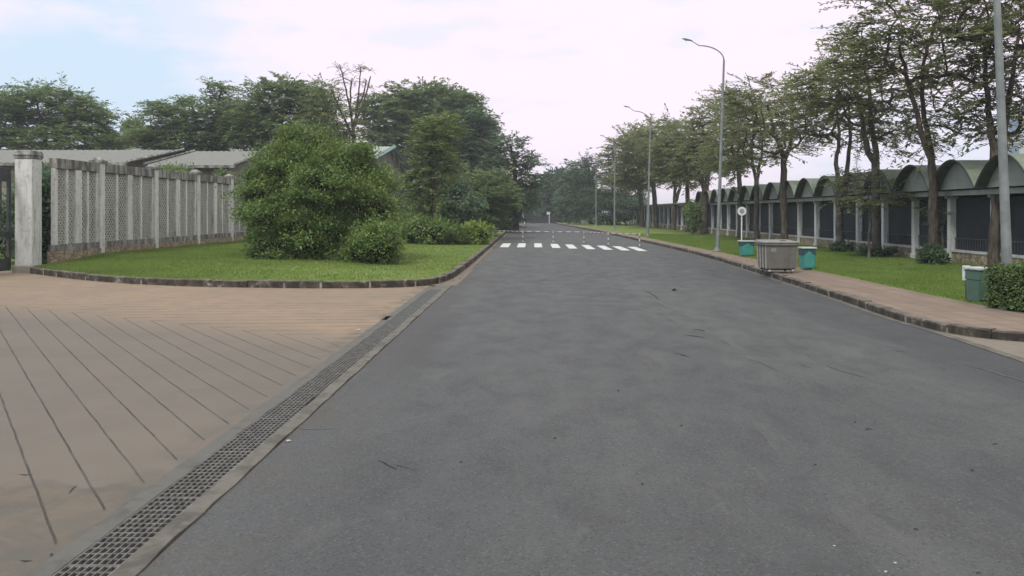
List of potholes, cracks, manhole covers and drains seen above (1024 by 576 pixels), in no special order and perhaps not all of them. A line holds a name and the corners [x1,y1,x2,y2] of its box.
drain grate [320,357,363,376]
drain grate [385,316,409,324]
drain grate [261,393,321,420]
crack [968,365,1024,381]
drain grate [157,451,253,501]
drain grate [217,418,292,454]
crack [623,277,705,337]
drain grate [341,344,378,360]
drain grate [53,565,120,576]
drain grate [294,373,344,395]
drain grate [67,497,200,571]
drain grate [372,324,401,334]
